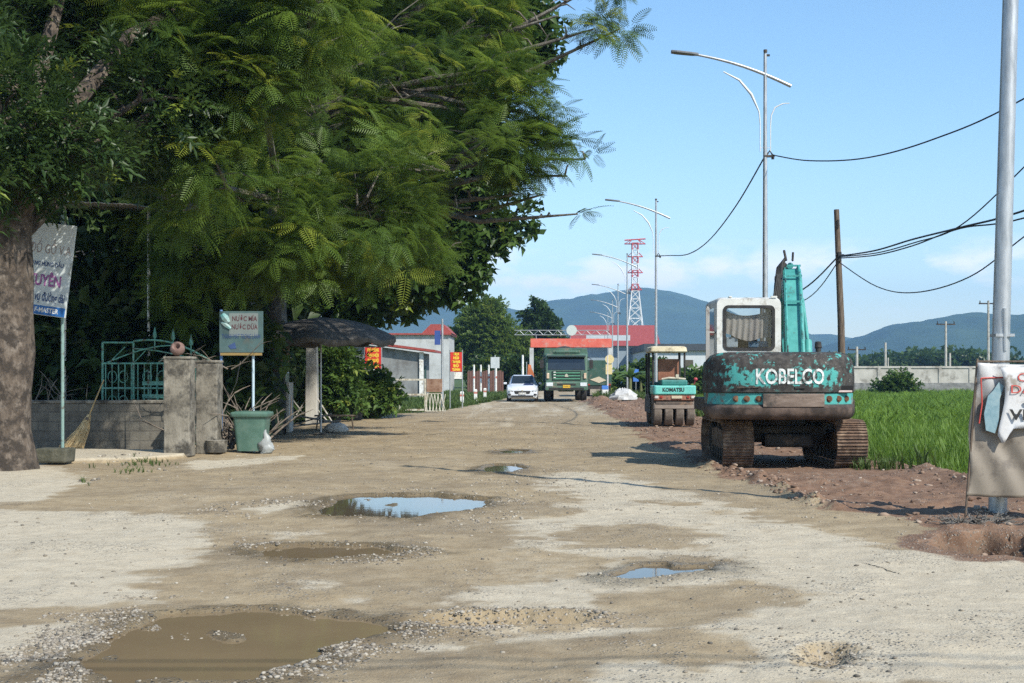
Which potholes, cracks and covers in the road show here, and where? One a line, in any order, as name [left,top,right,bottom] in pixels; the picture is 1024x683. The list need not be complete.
pothole [474,463,528,473]
pothole [383,607,614,630]
pothole [783,639,872,670]
pothole [602,561,727,579]
pothole [60,604,423,683]
pothole [236,541,426,559]
pothole [306,492,501,518]
